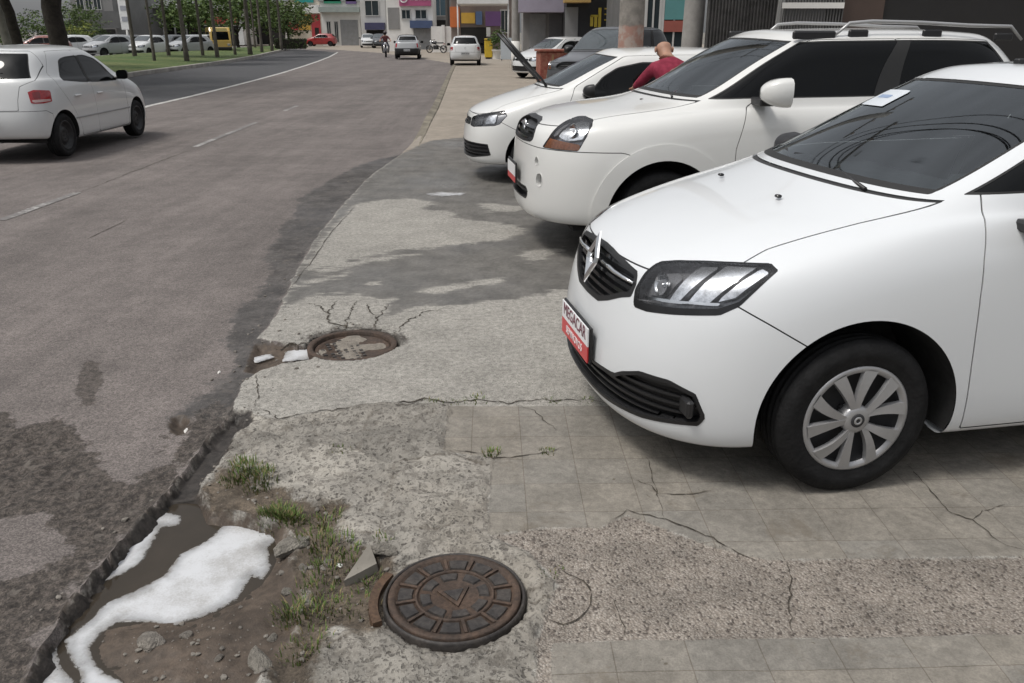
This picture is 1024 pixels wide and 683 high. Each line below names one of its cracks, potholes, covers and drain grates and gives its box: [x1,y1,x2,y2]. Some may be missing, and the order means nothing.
crack [906,463,1021,549]
crack [254,378,605,458]
pothole [243,340,308,374]
crack [616,457,755,560]
crack [276,301,437,350]
manhole cover [307,330,397,361]
manhole cover [383,553,526,653]
